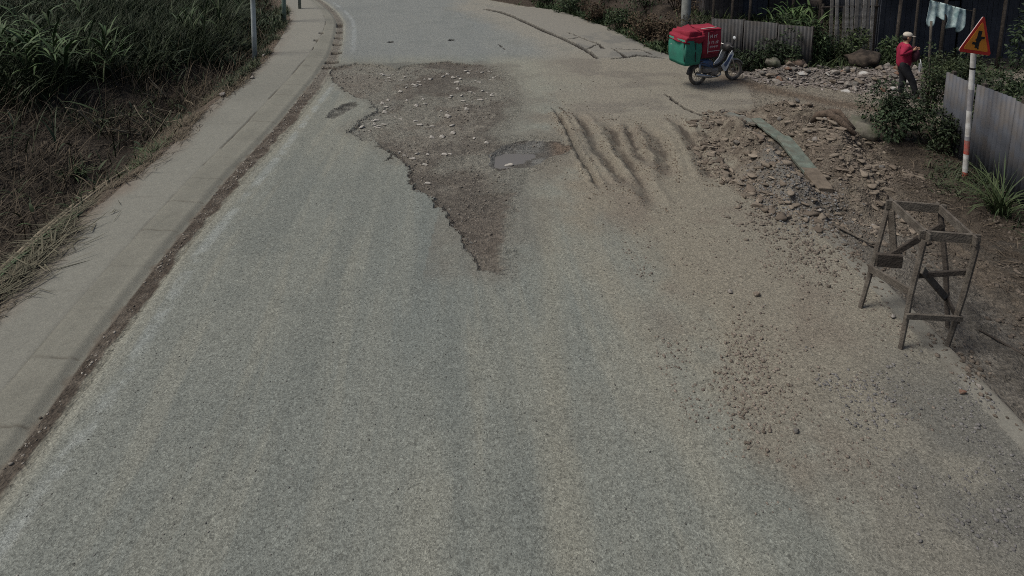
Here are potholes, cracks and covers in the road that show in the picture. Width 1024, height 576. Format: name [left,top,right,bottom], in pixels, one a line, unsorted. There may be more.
crack [483,9,664,59]
crack [664,94,710,118]
pothole [328,61,575,275]
